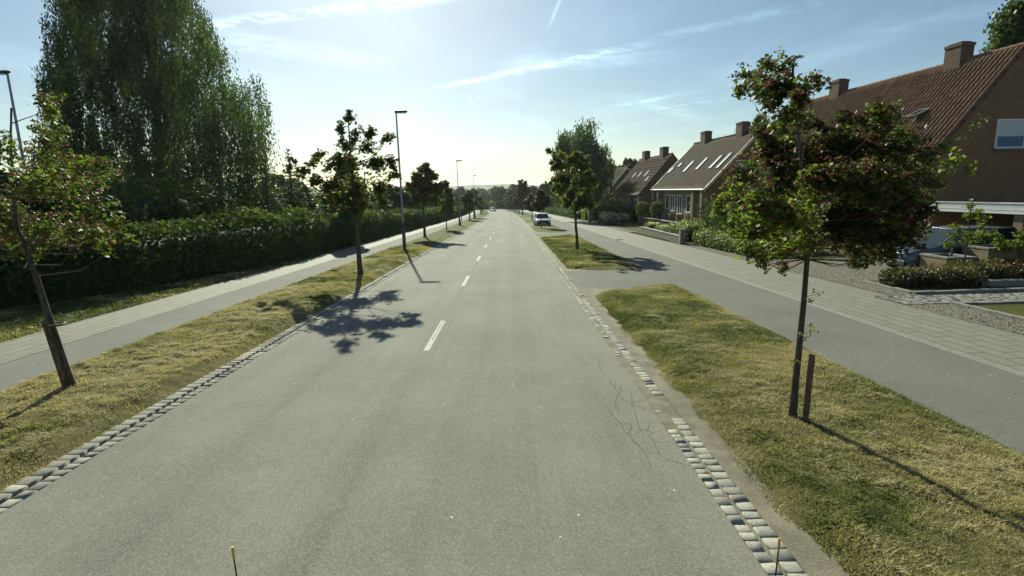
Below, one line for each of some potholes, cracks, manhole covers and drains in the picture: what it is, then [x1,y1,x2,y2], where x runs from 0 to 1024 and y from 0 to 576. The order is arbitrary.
crack [591,355,690,467]
